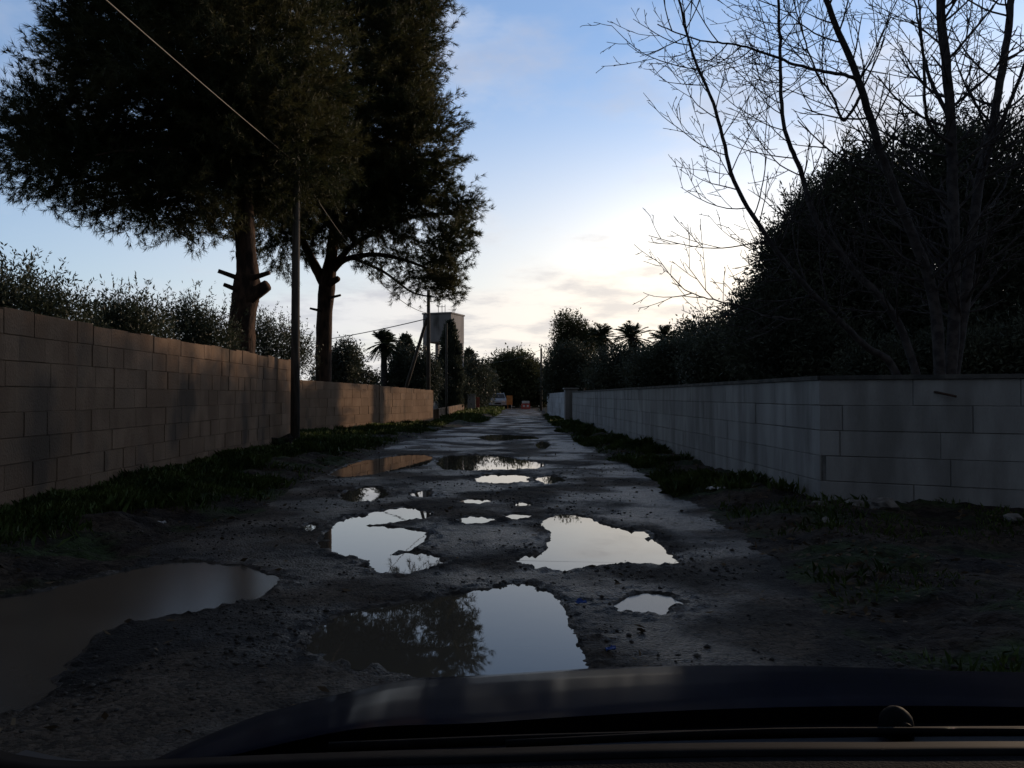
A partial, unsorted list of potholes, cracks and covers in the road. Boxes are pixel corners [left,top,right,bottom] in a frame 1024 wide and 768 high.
pothole [327,454,434,477]
pothole [511,513,683,571]
pothole [502,511,534,520]
pothole [0,557,285,714]
pothole [434,453,546,471]
pothole [338,486,391,502]
pothole [533,474,567,484]
pothole [456,515,496,525]
pothole [295,579,599,678]
pothole [473,473,534,483]
pothole [612,589,691,615]
pothole [315,505,452,575]
